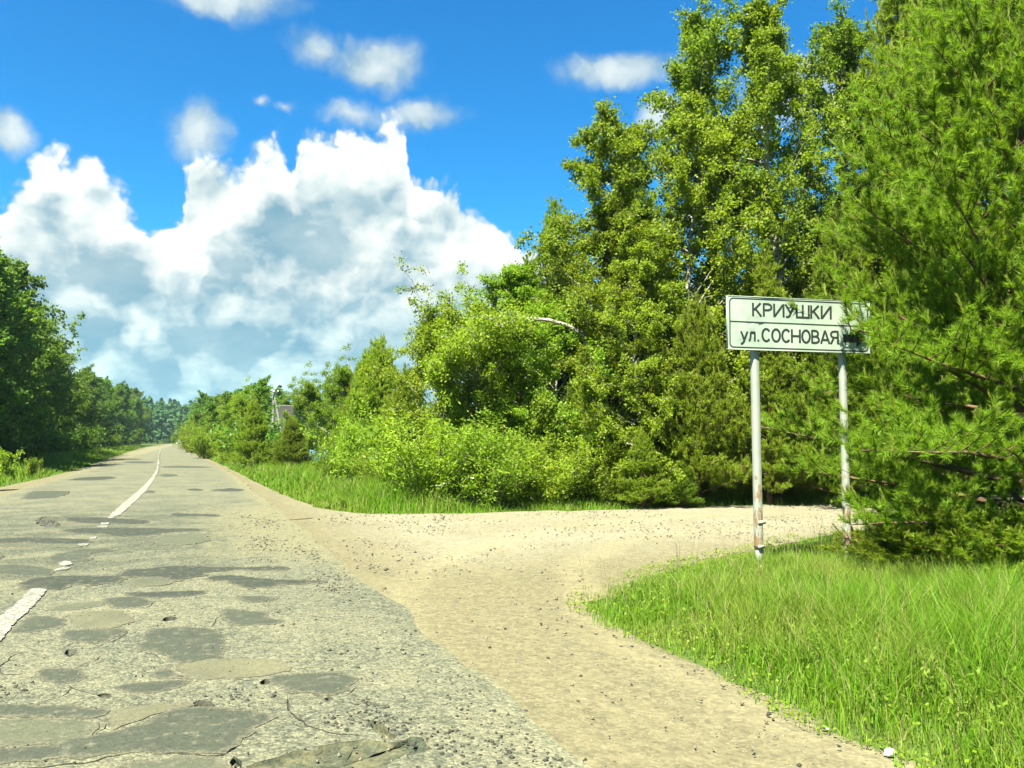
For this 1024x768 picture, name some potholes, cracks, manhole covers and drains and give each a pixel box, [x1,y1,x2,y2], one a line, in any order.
crack [43,748,236,768]
pothole [35,516,61,527]
crack [287,689,370,736]
